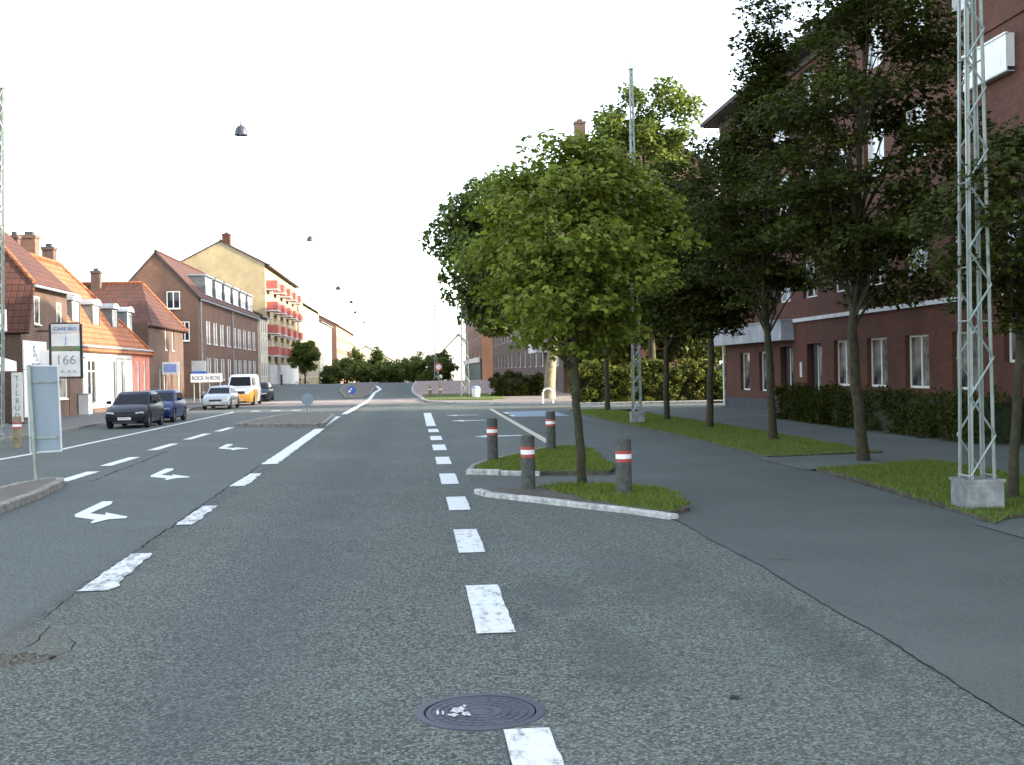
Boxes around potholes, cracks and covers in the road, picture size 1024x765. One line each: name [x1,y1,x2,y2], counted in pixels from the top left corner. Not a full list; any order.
pothole [0,651,59,671]
manhole cover [415,693,546,731]
